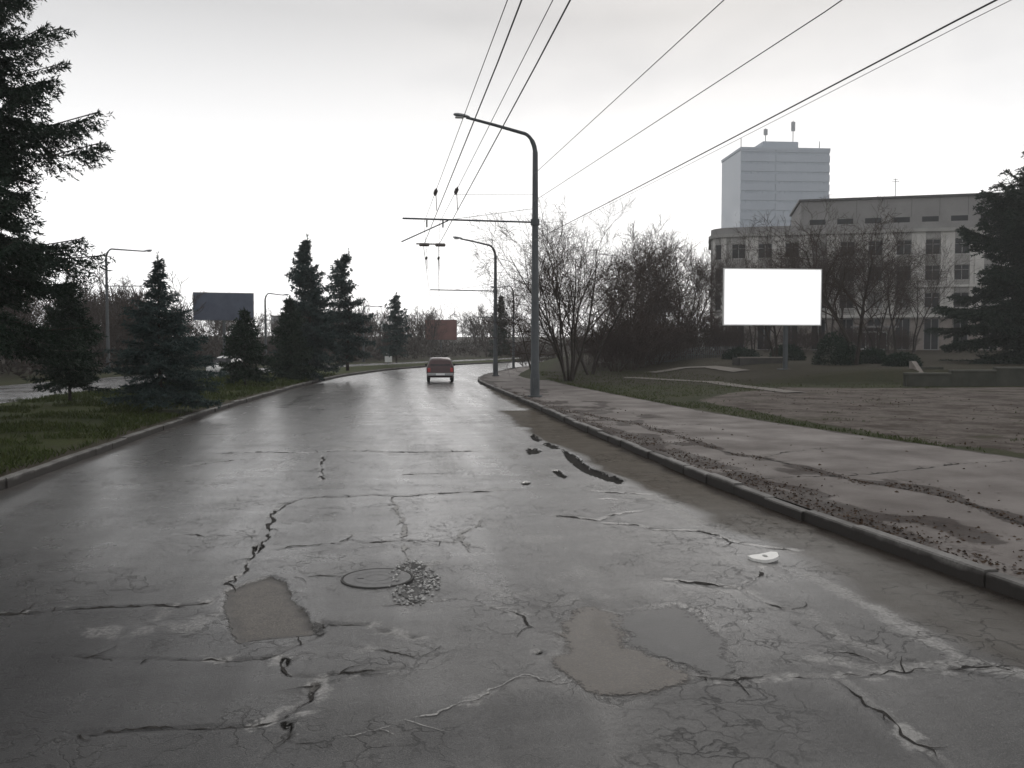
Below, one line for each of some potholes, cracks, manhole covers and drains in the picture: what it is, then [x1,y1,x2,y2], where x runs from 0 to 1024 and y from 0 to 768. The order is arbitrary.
crack [0,450,494,615]
crack [78,636,439,765]
crack [553,492,789,550]
crack [696,651,1023,765]
pothole [397,563,430,602]
pothole [561,449,624,484]
manhole cover [341,568,414,589]
